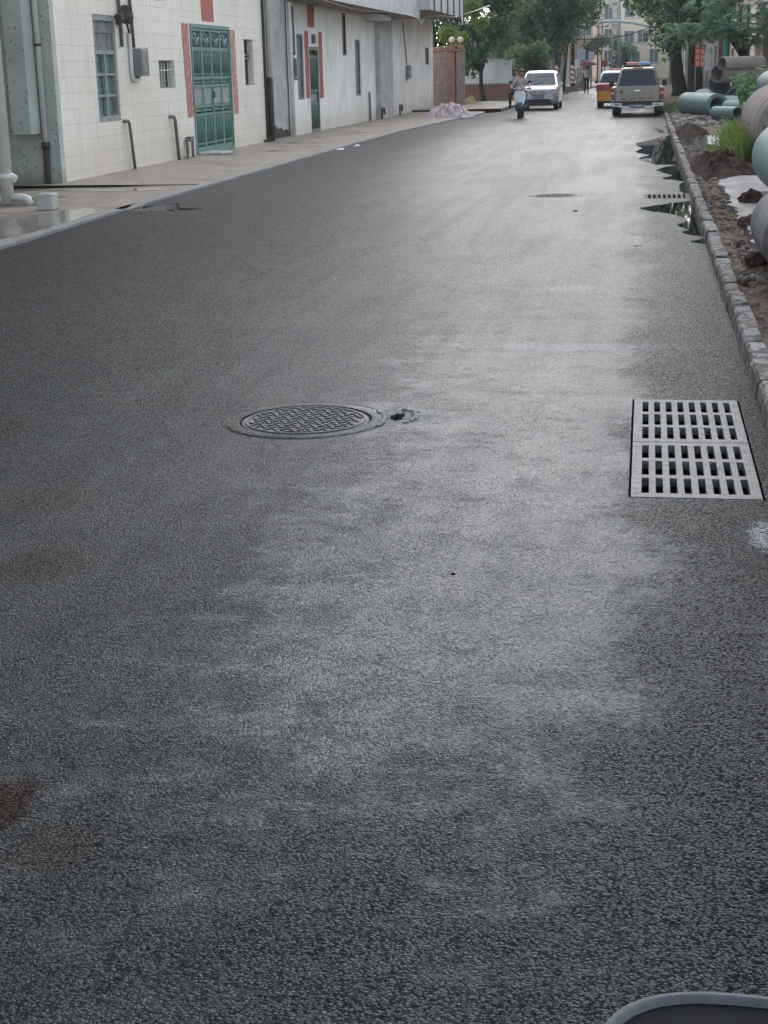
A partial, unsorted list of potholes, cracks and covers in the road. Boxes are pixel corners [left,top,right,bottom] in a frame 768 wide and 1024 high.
pothole [134,203,197,211]
drain grate [631,442,763,500]
manhole cover [222,403,388,440]
drain grate [633,399,748,444]
